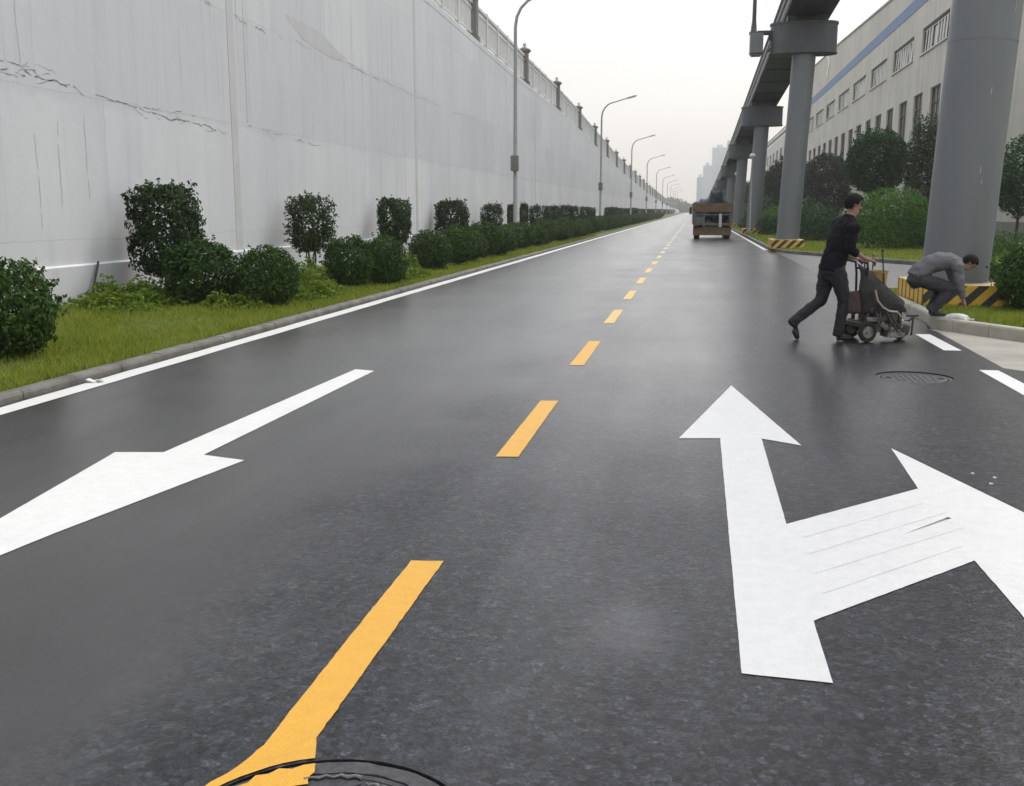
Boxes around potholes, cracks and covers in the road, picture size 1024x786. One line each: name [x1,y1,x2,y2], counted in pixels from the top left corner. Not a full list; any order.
manhole cover [876,371,954,383]
manhole cover [227,759,447,786]
